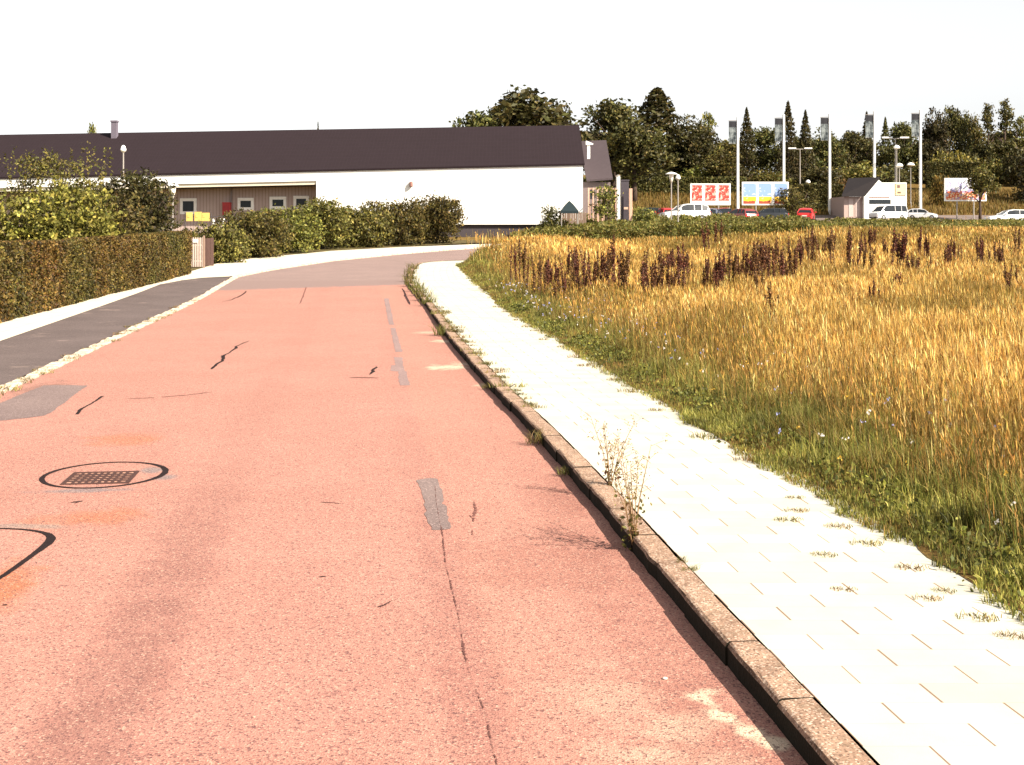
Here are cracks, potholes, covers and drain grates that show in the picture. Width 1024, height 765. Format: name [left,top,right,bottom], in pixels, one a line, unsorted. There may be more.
crack [211,341,248,369]
crack [435,489,498,764]
